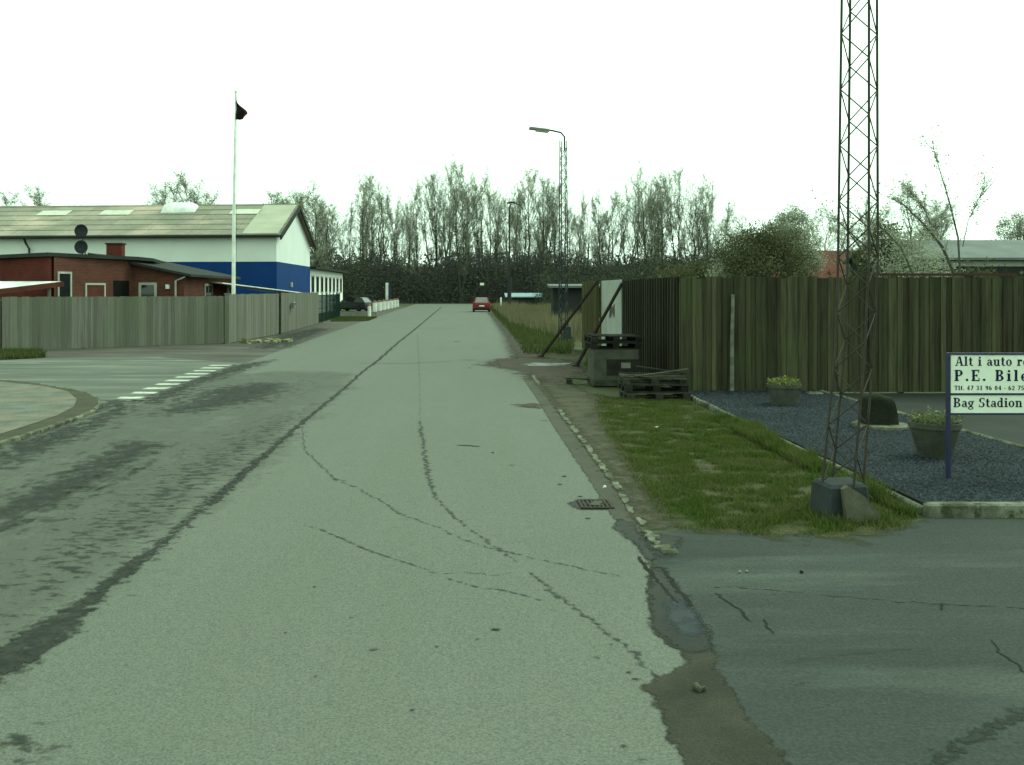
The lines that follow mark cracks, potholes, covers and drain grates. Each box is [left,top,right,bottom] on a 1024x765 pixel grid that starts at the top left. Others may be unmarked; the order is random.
crack [714,586,1024,634]
crack [991,640,1024,672]
crack [301,328,661,677]
